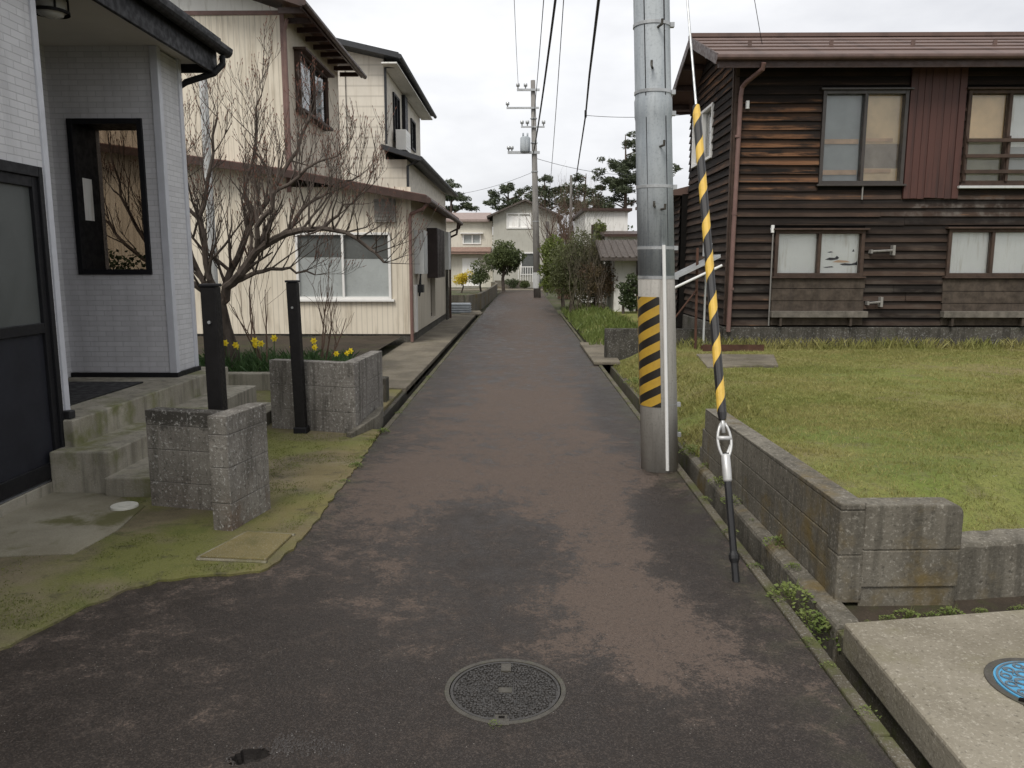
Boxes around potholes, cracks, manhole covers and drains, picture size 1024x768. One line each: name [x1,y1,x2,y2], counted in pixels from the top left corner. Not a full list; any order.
manhole cover [984,658,1024,706]
manhole cover [444,659,566,725]
utility cover [110,501,139,511]
